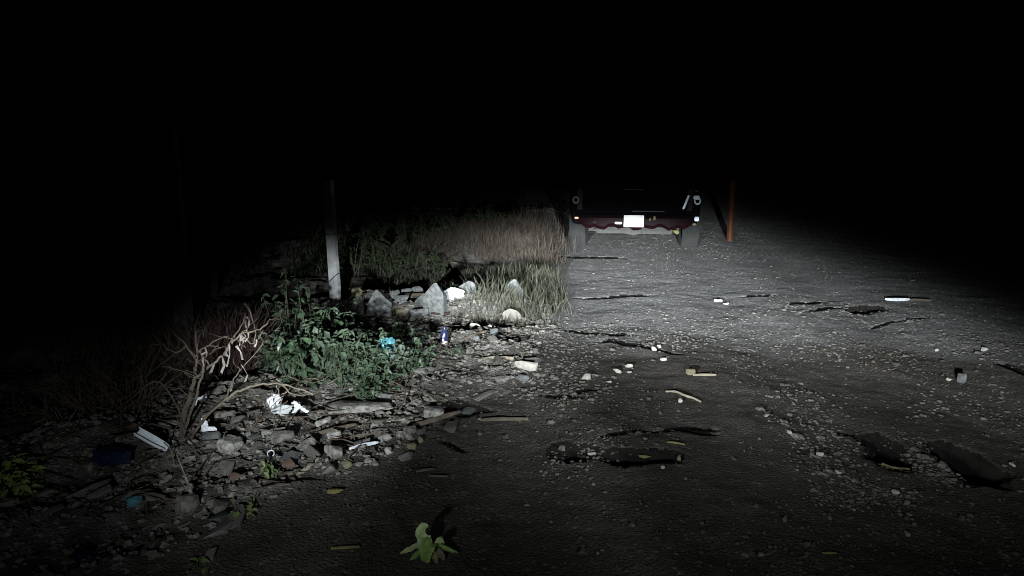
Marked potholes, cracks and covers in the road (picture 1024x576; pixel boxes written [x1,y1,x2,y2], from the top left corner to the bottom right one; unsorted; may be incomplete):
crack [566,330,671,354]
pothole [853,432,960,477]
crack [998,364,1024,375]
crack [605,427,715,437]
crack [872,318,923,329]
pothole [579,443,685,466]
pothole [547,441,610,463]
pothole [842,305,886,315]
pothole [895,440,1013,490]
